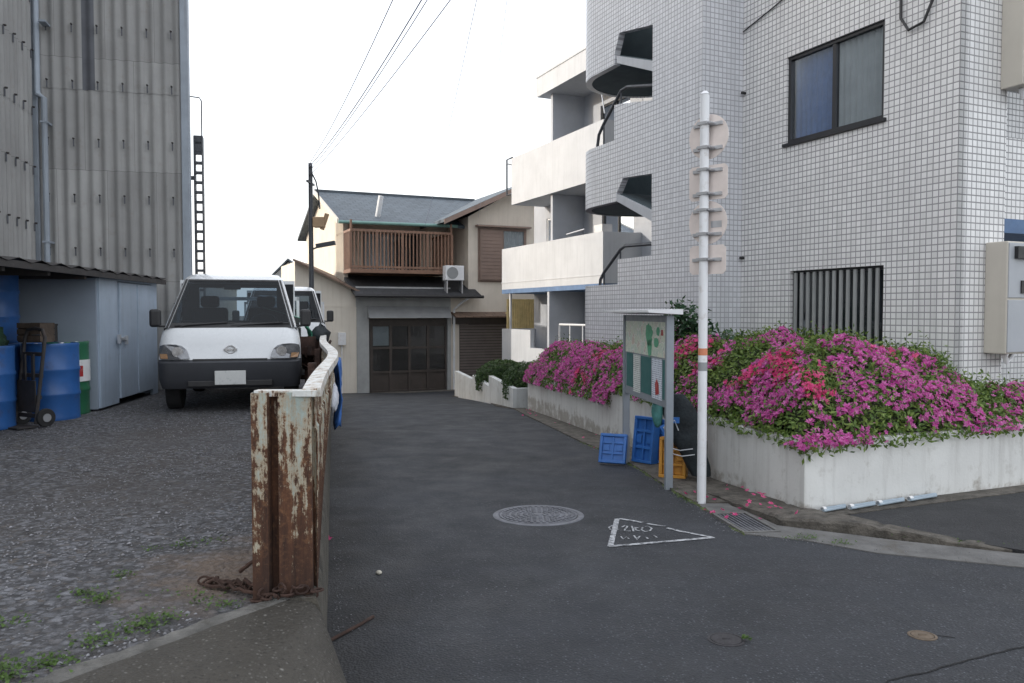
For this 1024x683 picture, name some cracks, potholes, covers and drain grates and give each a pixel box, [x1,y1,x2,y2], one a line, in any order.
drain grate [712,512,781,533]
utility cover [907,630,938,641]
crack [885,635,1024,683]
manhole cover [493,505,584,526]
utility cover [707,632,745,647]
